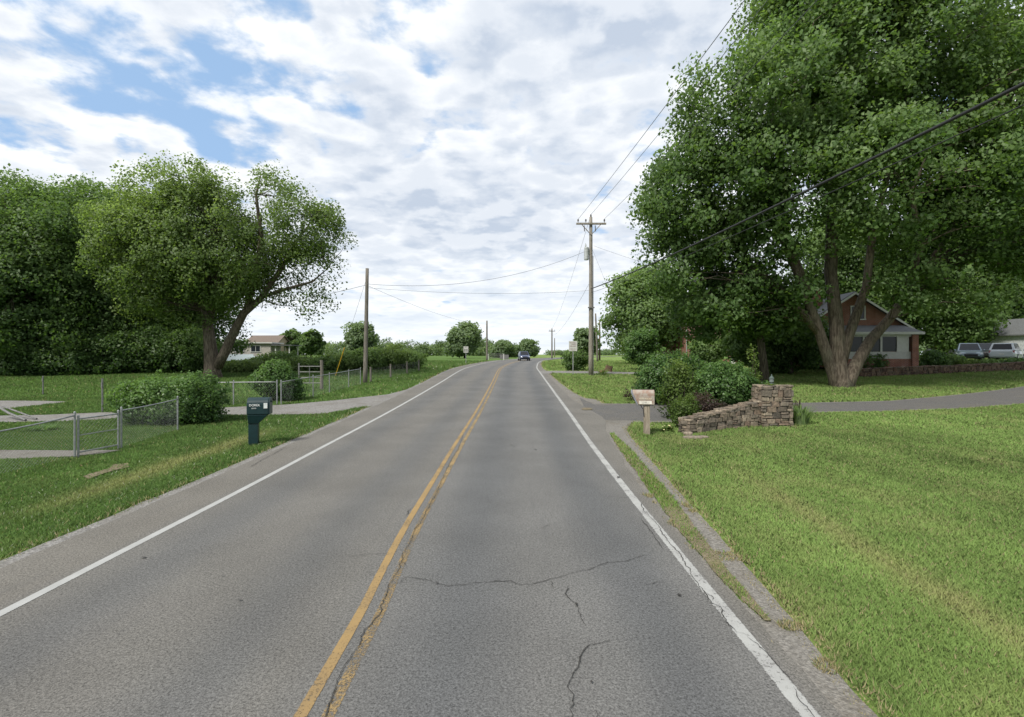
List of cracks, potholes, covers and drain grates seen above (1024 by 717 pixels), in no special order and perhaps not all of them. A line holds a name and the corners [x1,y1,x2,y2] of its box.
crack [567,640,609,716]
crack [396,554,649,625]
